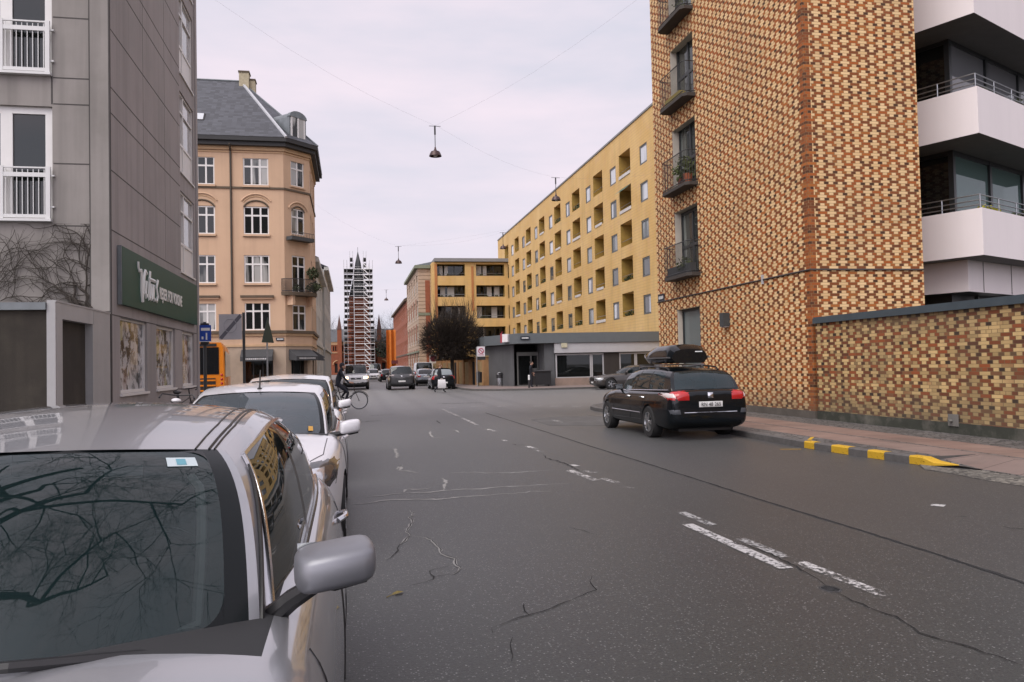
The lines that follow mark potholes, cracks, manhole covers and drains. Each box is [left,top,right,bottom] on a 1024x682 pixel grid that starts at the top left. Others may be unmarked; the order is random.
crack [734,542,1021,665]
crack [360,449,579,584]
crack [492,578,597,633]
